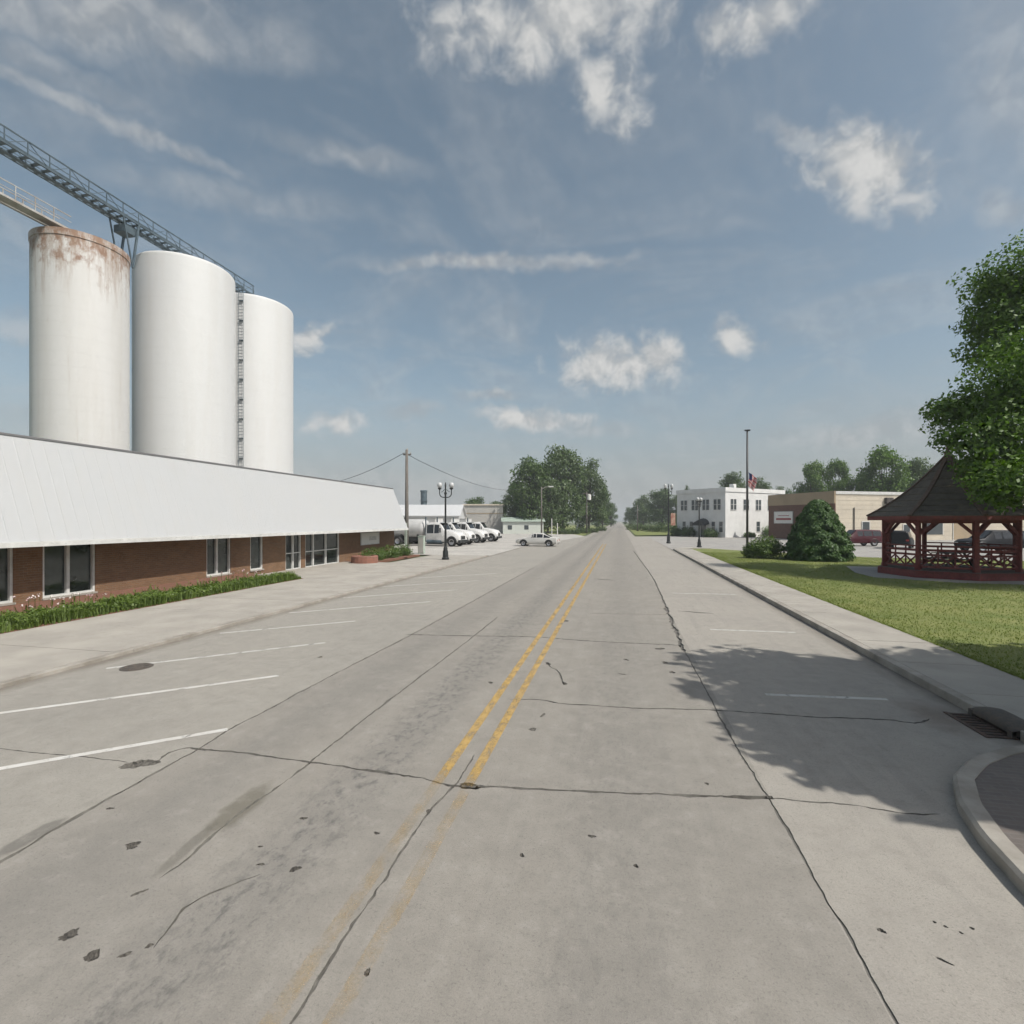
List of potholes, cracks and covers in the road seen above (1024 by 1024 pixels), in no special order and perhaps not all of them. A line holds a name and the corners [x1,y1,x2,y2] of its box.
pothole [58,928,79,941]
drain grate [943,707,1024,740]
pothole [119,759,161,769]
pothole [83,949,100,962]
manhole cover [119,663,154,671]
